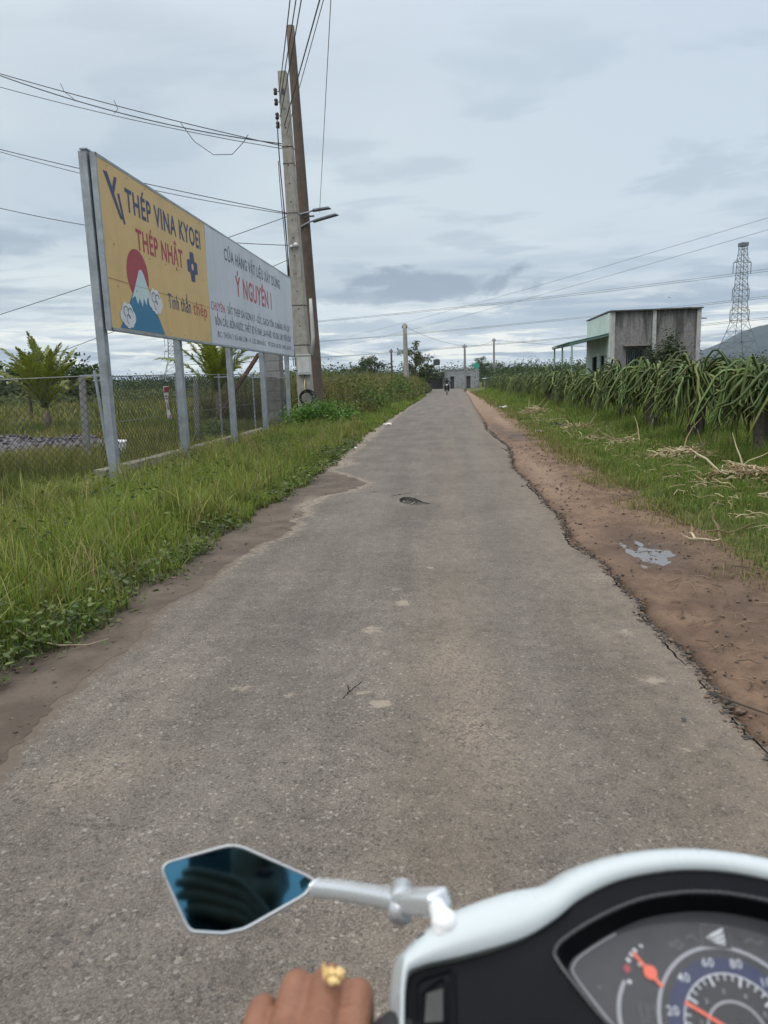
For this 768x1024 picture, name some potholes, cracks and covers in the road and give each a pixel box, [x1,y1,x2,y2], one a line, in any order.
pothole [399,497,430,505]
